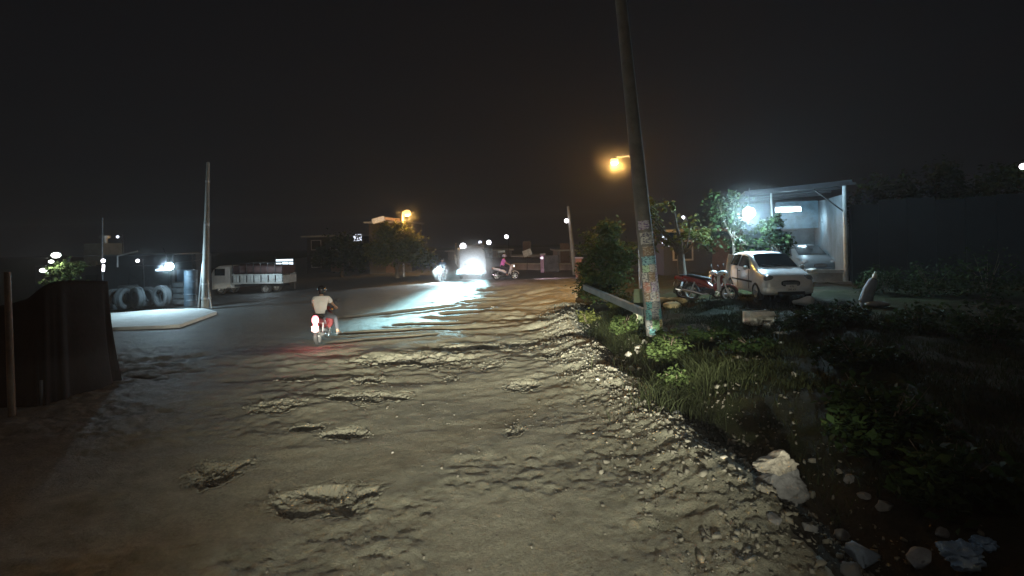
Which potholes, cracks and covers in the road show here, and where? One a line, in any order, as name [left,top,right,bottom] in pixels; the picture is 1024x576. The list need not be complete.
pothole [244,478,392,524]
pothole [497,379,544,394]
pothole [347,375,386,386]
pothole [310,426,376,443]
pothole [306,391,416,407]
pothole [241,397,308,416]
pothole [502,423,528,438]
pothole [340,351,474,369]
pothole [171,457,263,493]
pothole [276,422,333,434]
